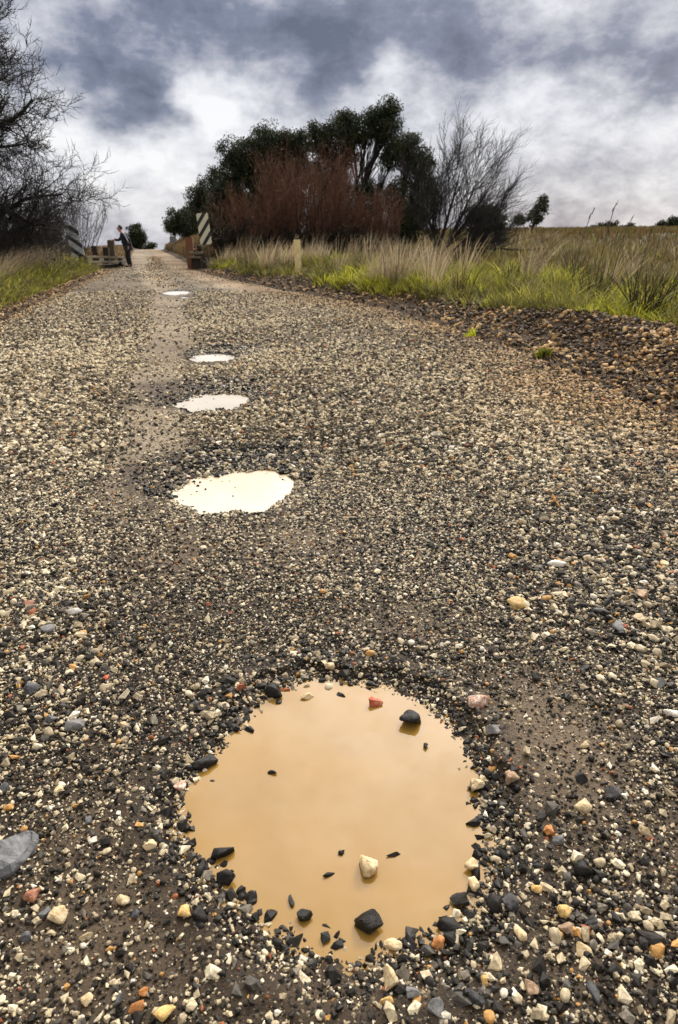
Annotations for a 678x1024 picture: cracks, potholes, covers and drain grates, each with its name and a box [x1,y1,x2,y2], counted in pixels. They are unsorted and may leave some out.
pothole [176,344,264,364]
pothole [125,375,276,416]
pothole [120,441,331,521]
pothole [116,647,564,1024]
pothole [159,288,215,296]
